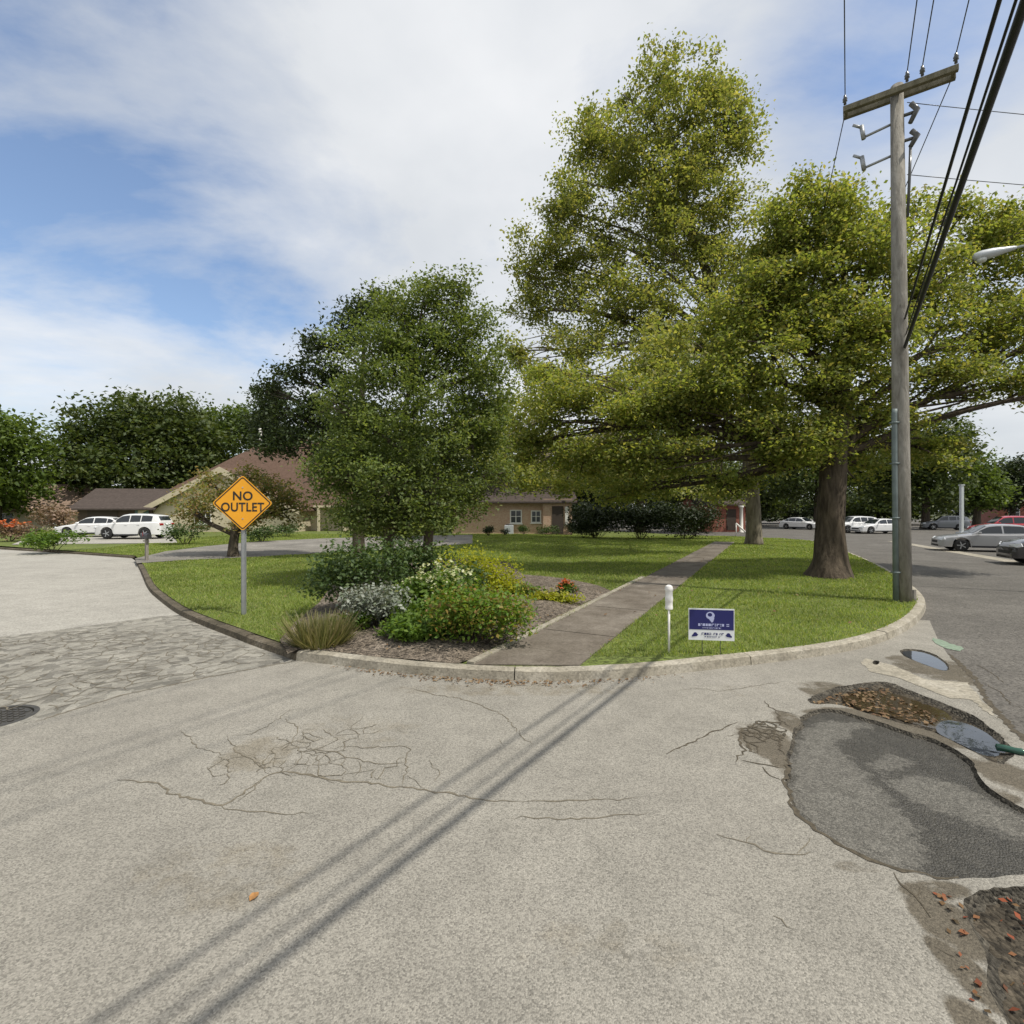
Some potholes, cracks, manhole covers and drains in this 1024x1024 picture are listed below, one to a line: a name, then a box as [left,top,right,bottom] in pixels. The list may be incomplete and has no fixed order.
manhole cover [0,705,40,727]
pothole [963,886,1024,1024]
crack [415,689,530,742]
crack [666,682,792,779]
pothole [900,649,949,671]
crack [124,710,516,815]
crack [513,797,648,820]
crack [718,834,811,855]
pothole [807,682,1014,764]
